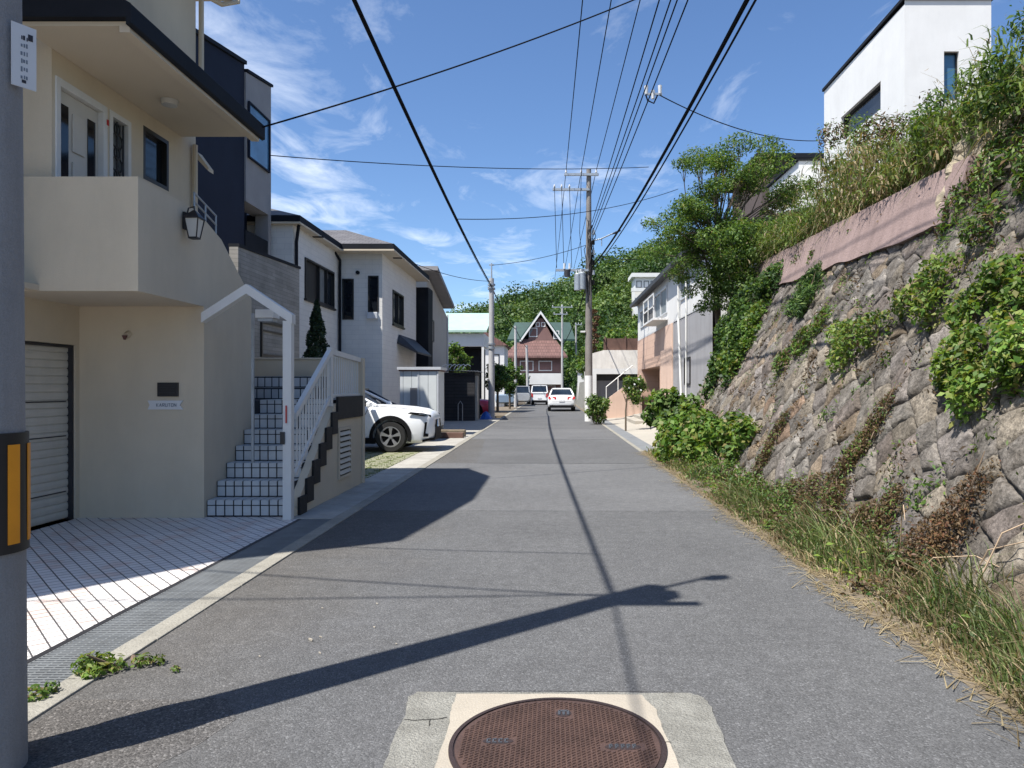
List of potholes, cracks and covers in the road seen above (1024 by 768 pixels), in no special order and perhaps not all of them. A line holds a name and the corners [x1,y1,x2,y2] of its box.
drain grate [166,560,263,591]
drain grate [225,537,301,560]
drain grate [27,637,136,695]
manhole cover [383,692,736,768]
drain grate [269,519,331,537]
drain grate [79,591,212,637]
